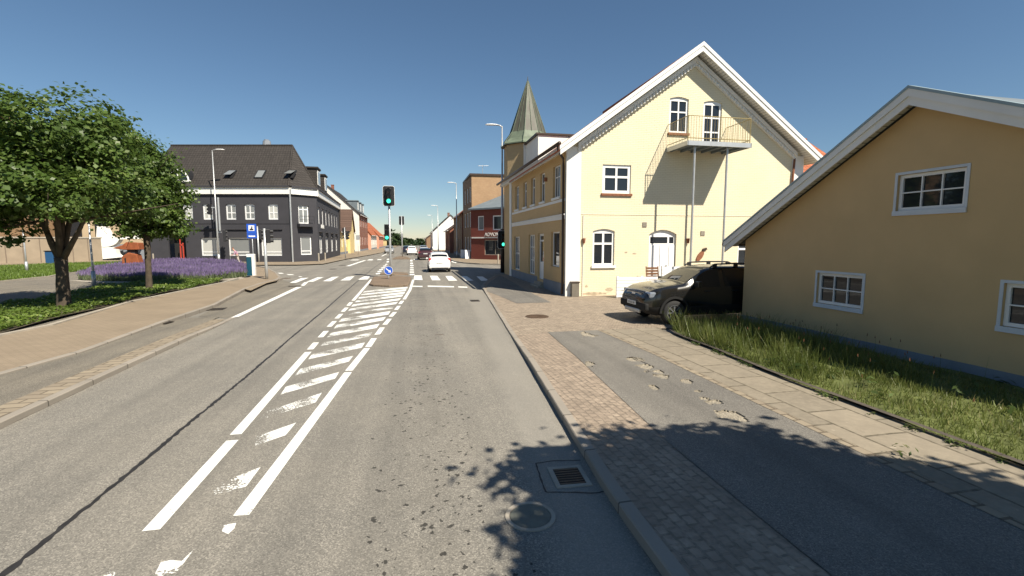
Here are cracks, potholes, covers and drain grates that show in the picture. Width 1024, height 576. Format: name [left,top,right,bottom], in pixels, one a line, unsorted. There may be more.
drain grate [547,465,593,489]
manhole cover [505,502,556,532]
pothole [713,410,750,422]
